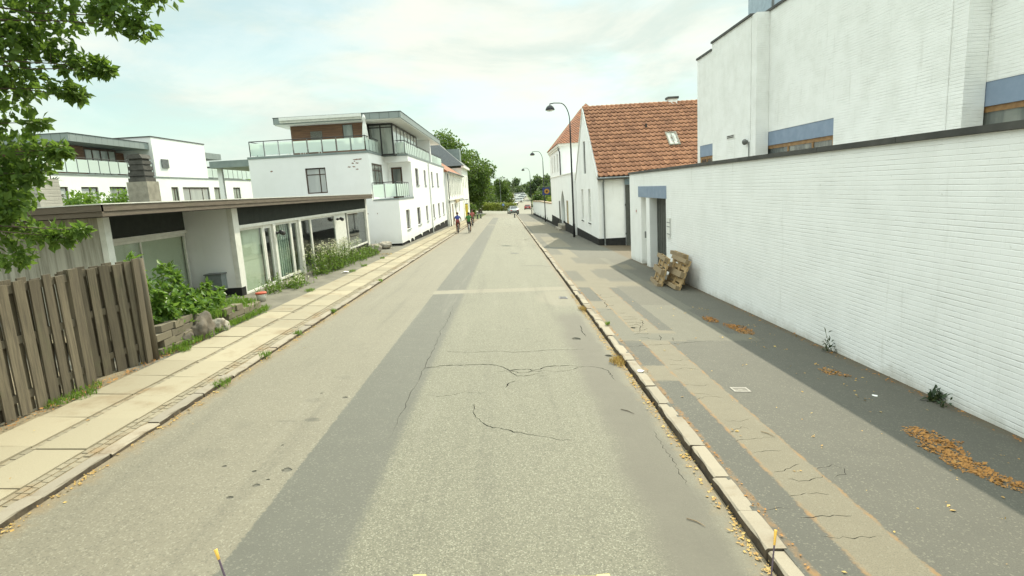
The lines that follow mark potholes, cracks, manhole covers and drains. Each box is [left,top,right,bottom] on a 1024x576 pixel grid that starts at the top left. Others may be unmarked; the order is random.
crack [389,307,614,440]
